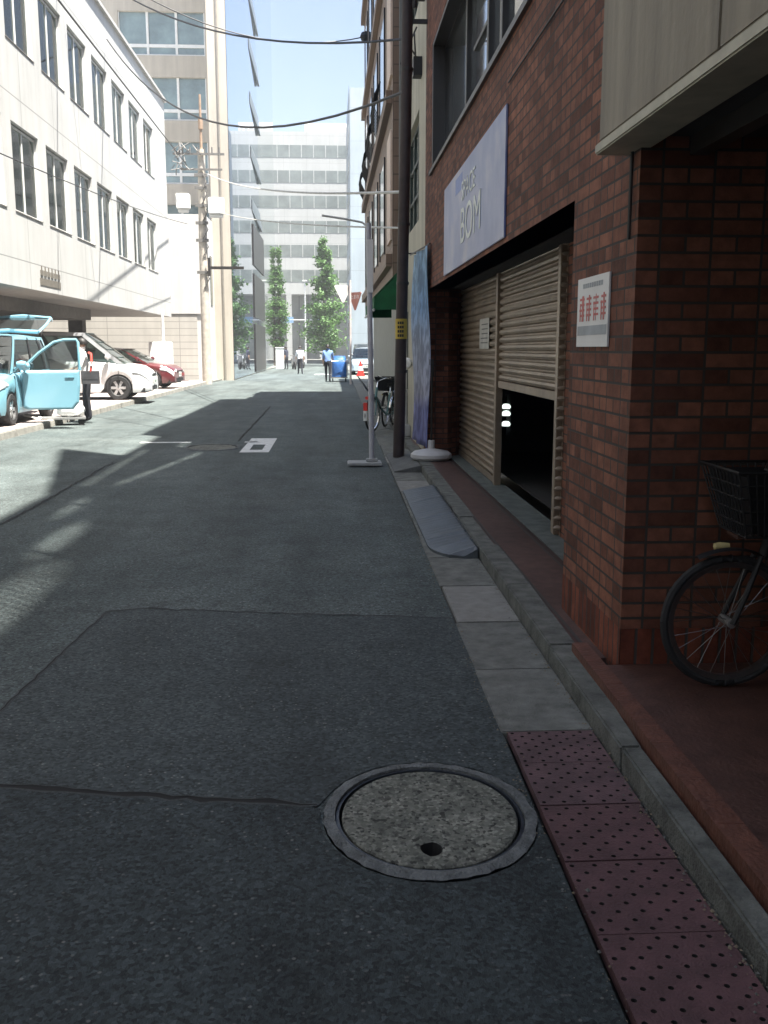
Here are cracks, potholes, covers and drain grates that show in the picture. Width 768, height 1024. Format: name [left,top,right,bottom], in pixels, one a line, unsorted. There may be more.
manhole cover [323,762,538,883]
